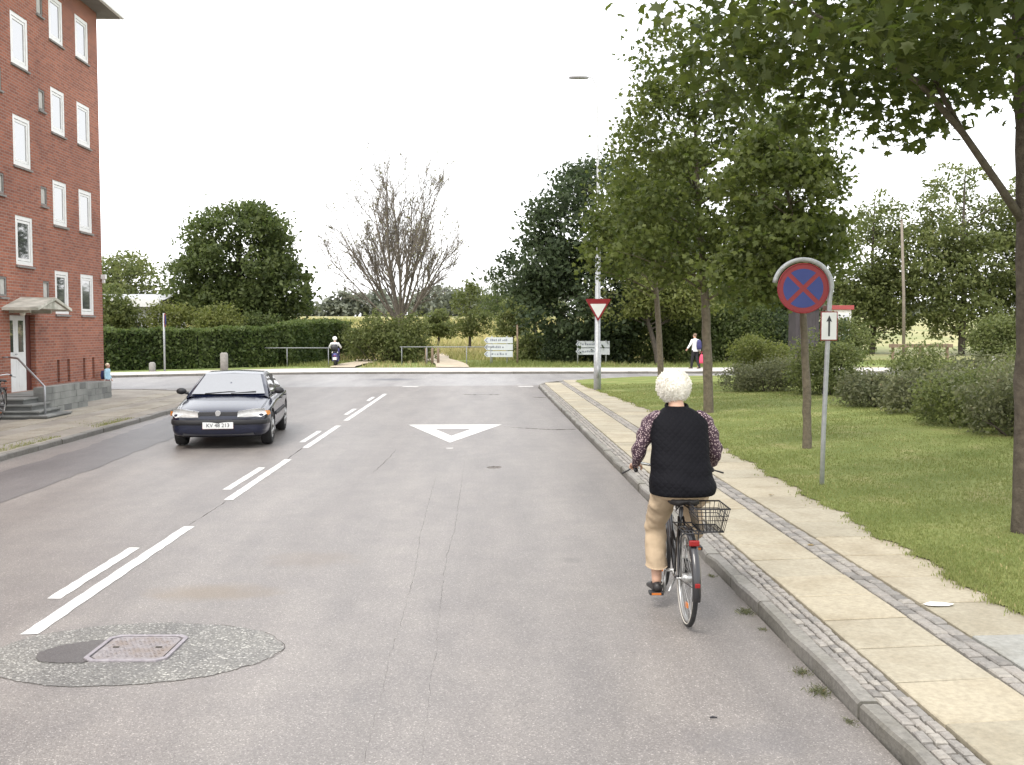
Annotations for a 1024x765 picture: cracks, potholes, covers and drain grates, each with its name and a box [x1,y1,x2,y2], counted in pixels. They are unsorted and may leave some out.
manhole cover [83,634,189,662]
